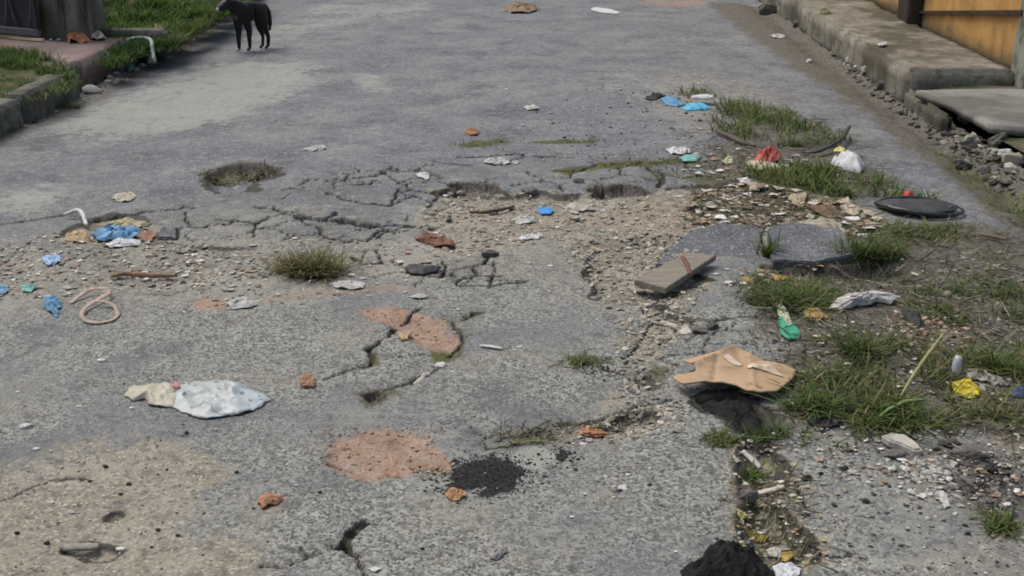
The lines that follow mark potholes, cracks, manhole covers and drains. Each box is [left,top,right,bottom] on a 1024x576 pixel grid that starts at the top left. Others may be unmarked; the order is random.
pothole [199,161,288,194]
crack [261,518,383,576]
pothole [692,390,777,440]
crack [0,476,94,502]
crack [471,297,800,457]
crack [130,144,722,291]
crack [325,309,486,391]
